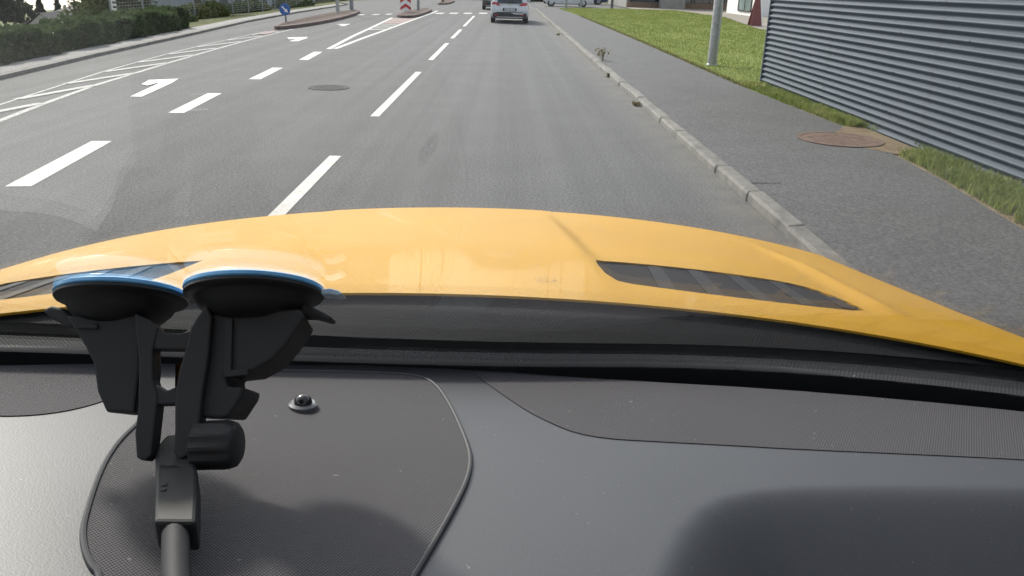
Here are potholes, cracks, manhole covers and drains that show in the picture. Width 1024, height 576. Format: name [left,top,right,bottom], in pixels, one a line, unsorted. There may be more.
manhole cover [796,132,884,147]
